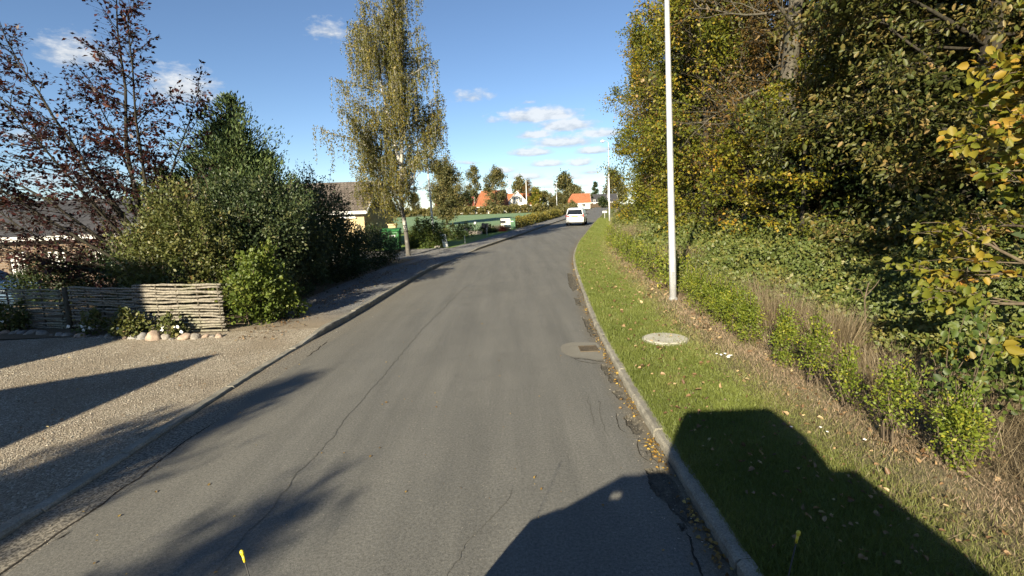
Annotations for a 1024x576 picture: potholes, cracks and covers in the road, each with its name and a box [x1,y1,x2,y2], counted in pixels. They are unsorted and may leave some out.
crack [616,413,658,463]
manhole cover [642,333,689,346]
crack [446,488,513,576]
crack [686,522,703,576]
